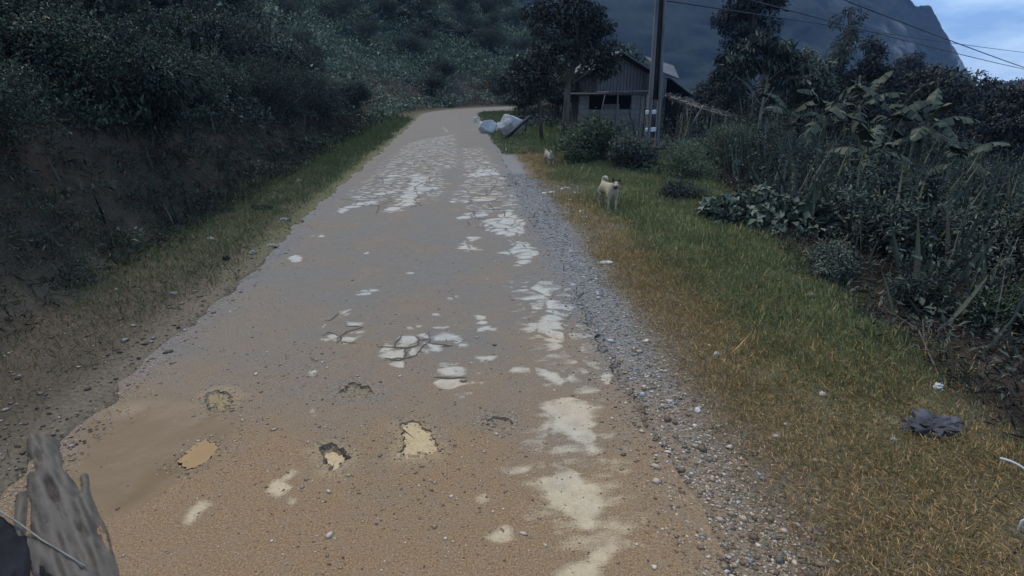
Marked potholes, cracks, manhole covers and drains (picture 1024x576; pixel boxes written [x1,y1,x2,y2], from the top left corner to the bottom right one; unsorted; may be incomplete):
pothole [196,387,239,419]
pothole [312,436,359,477]
crack [378,332,464,379]
pothole [391,414,452,463]
crack [344,160,444,214]
pothole [481,412,519,434]
crack [322,314,362,343]
pothole [330,379,382,402]
crack [462,169,522,229]
